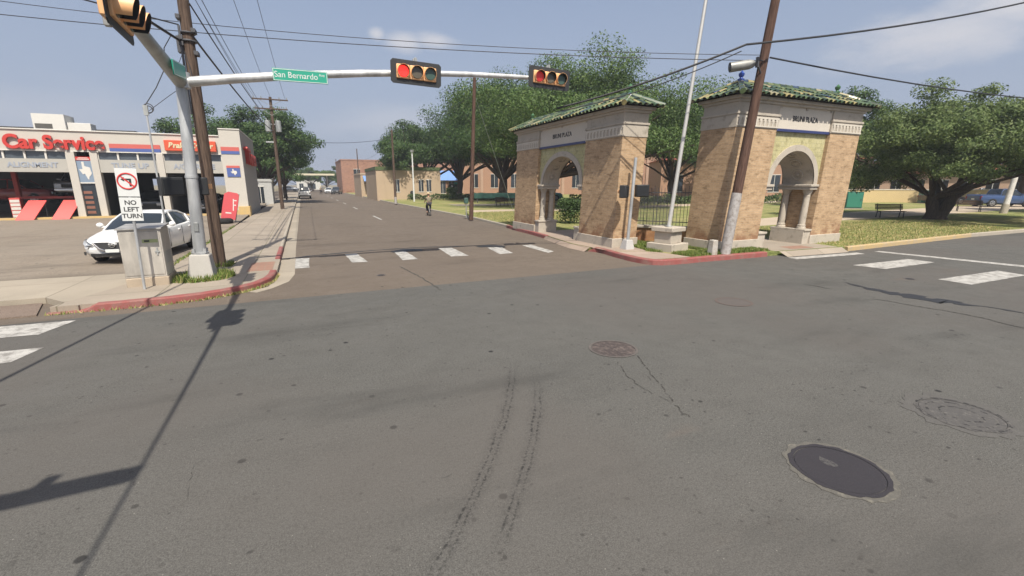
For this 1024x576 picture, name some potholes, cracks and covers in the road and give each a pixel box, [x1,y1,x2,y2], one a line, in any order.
manhole cover [782,442,901,503]
manhole cover [589,340,638,357]
crack [621,355,706,424]
manhole cover [715,297,753,306]
manhole cover [899,392,1024,440]
